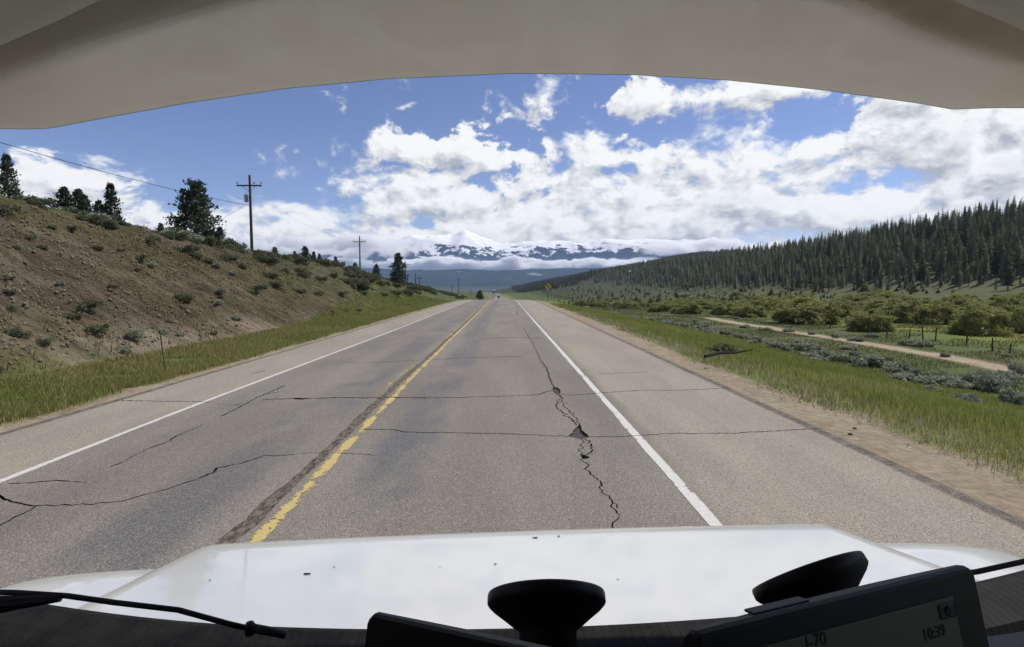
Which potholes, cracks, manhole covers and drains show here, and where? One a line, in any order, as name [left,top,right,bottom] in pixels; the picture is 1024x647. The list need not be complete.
crack [110,330,819,528]
pothole [568,425,589,439]
crack [0,453,305,526]
